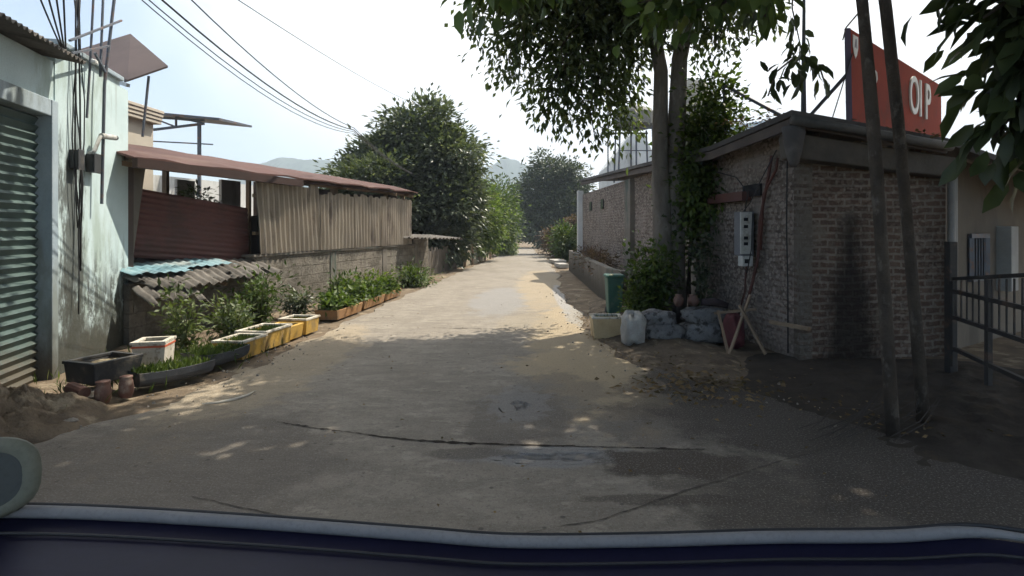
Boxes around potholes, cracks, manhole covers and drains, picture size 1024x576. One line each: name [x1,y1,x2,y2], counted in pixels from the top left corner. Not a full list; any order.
crack [192,496,279,515]
pothole [499,396,544,416]
